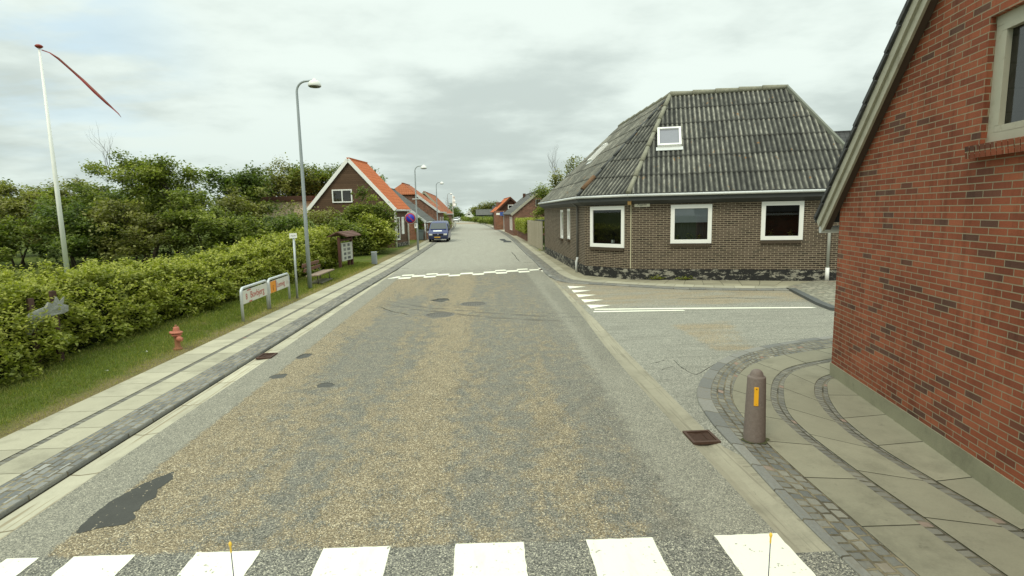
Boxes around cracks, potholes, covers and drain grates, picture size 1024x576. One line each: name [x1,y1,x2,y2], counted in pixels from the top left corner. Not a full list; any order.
drain grate [682,430,721,445]
